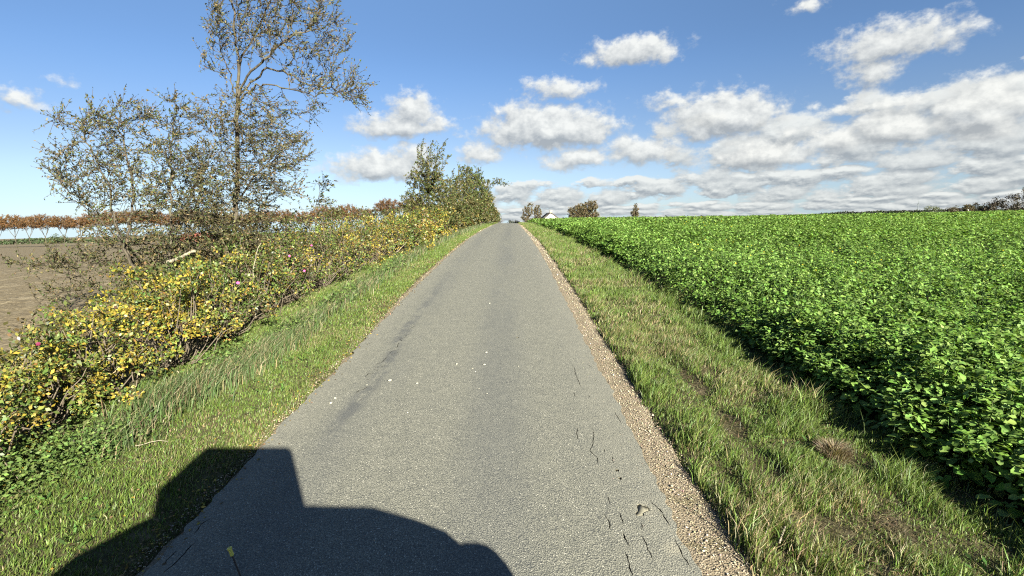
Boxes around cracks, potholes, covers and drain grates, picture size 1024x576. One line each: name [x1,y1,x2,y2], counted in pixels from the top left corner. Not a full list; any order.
pothole [635,504,650,516]
crack [164,519,210,572]
crack [604,497,690,575]
